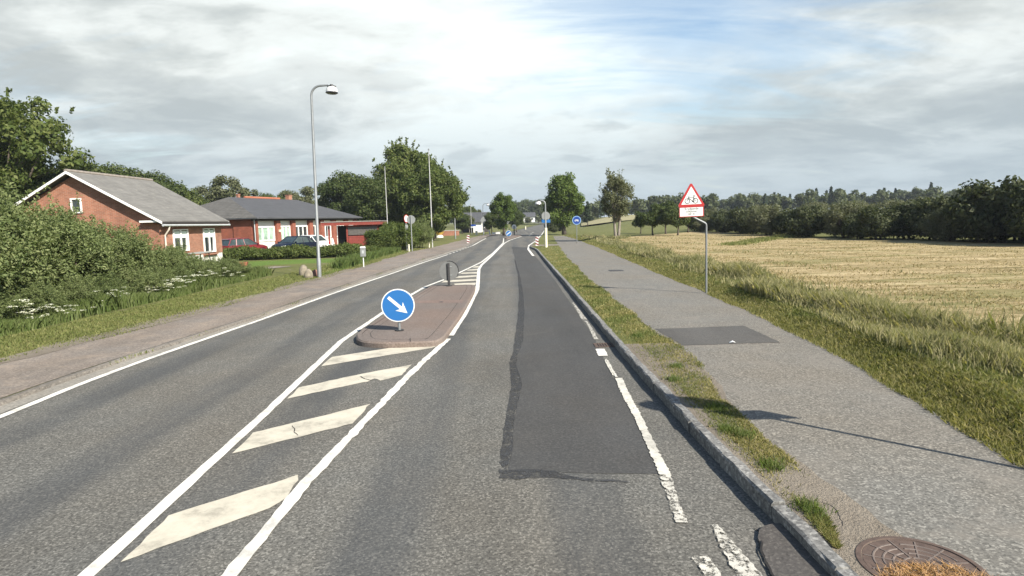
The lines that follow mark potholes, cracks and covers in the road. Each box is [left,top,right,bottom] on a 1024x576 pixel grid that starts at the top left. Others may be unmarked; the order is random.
manhole cover [855,536,990,576]
